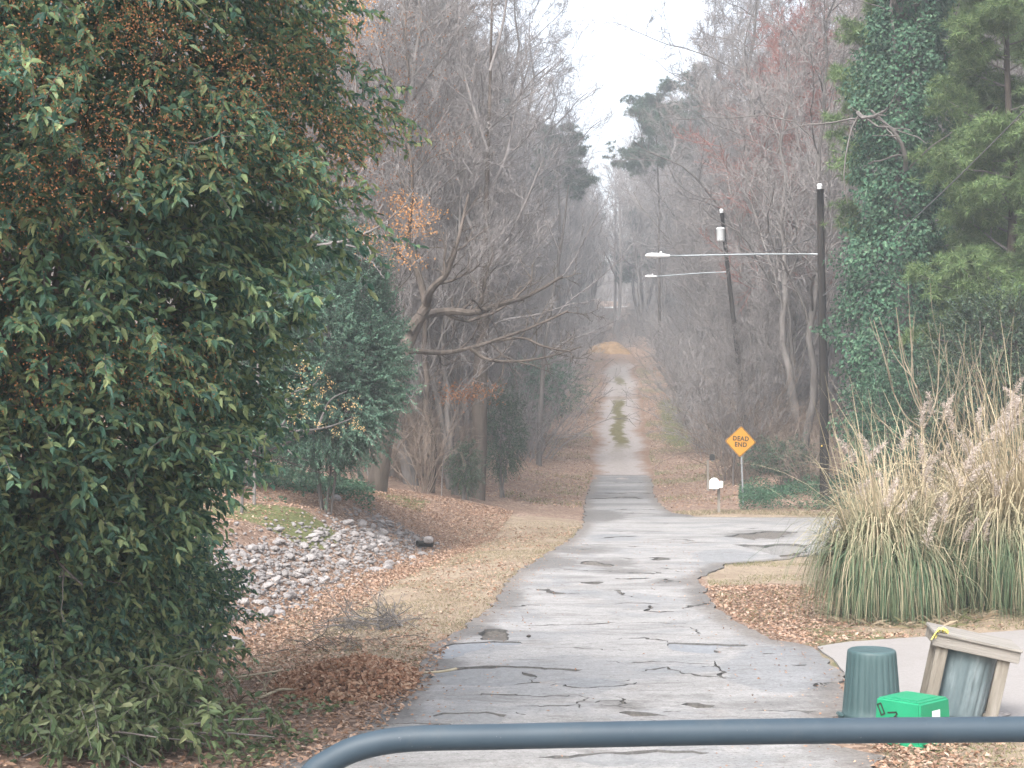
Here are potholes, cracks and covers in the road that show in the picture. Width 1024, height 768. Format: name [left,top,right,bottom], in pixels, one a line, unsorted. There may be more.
crack [528,531,709,642]
pothole [478,629,509,641]
crack [477,647,727,720]
